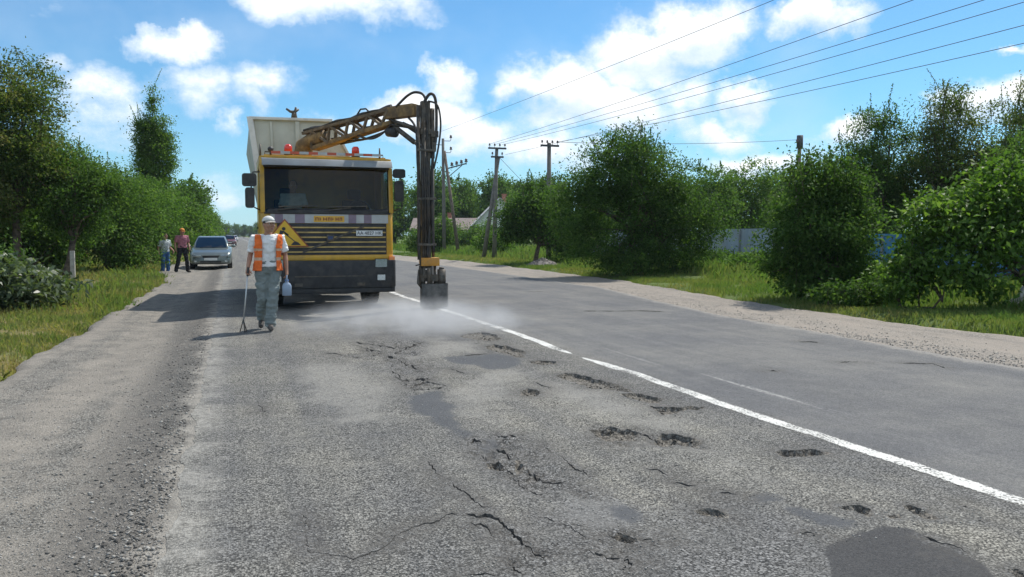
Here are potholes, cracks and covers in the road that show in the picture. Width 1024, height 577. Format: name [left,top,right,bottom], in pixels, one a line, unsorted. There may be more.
pothole [520,388,541,397]
pothole [775,449,832,457]
pothole [588,426,643,443]
pothole [695,508,729,519]
crack [301,461,553,577]
crack [544,517,632,570]
pothole [903,504,939,520]
pothole [620,393,663,404]
pothole [557,373,632,392]
pothole [485,344,527,358]
pothole [459,332,502,341]
pothole [650,405,704,415]
